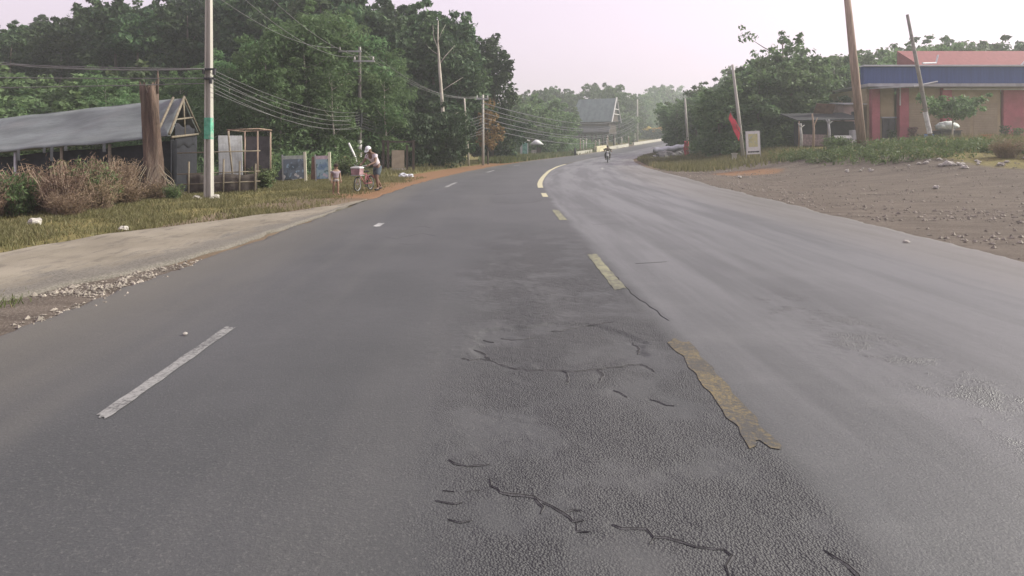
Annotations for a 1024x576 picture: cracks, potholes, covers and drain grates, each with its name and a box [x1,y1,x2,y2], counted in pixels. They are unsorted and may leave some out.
crack [462,322,674,406]
crack [612,524,735,576]
crack [435,459,591,532]
